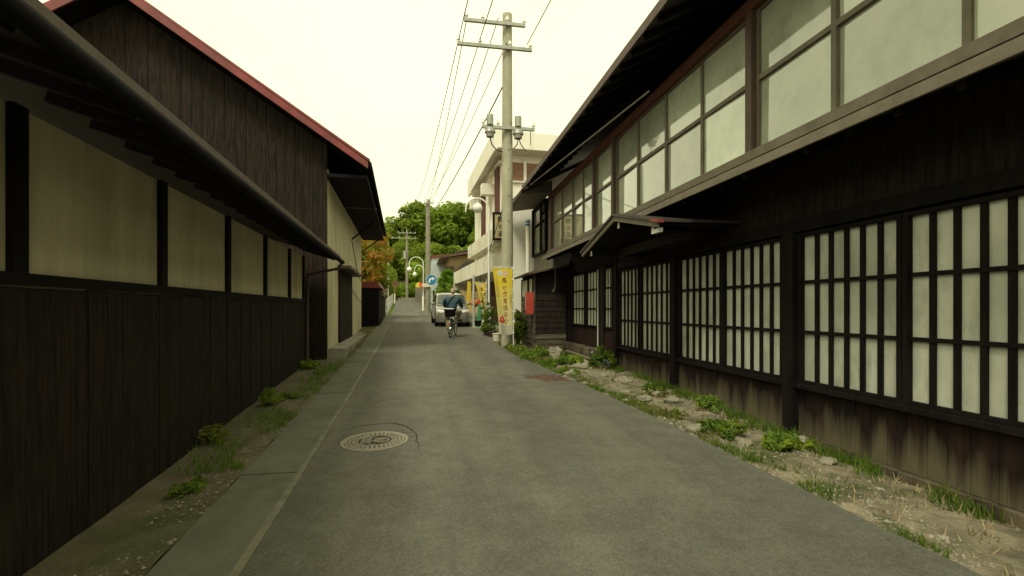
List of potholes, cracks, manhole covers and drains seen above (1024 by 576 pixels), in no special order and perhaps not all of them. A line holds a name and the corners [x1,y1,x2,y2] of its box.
manhole cover [340,431,408,451]
